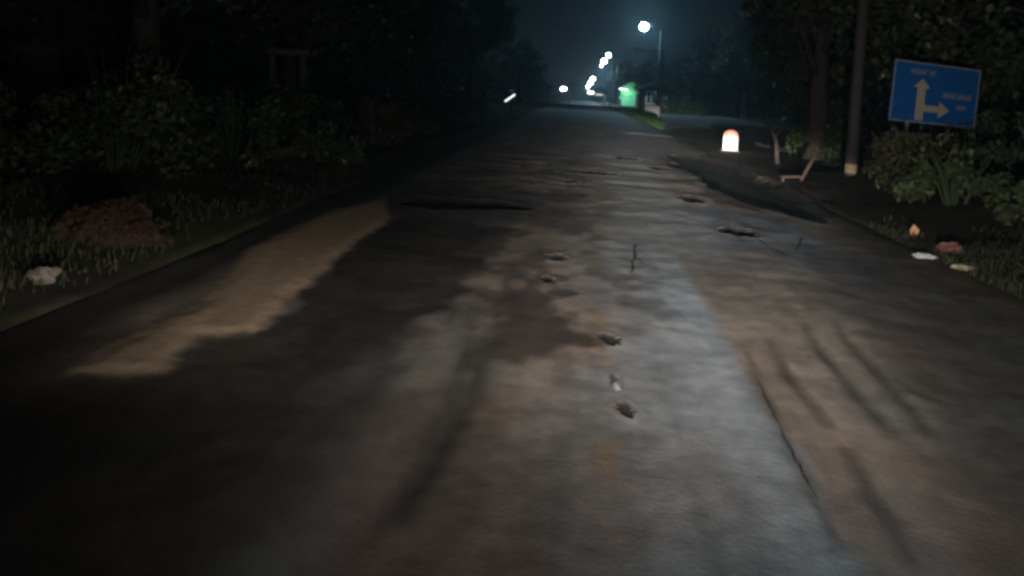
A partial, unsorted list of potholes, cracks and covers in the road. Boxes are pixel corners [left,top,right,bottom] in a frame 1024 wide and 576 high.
pothole [602,396,649,425]
pothole [530,273,567,285]
pothole [534,252,580,263]
pothole [658,154,837,227]
crack [758,381,819,500]
crack [623,244,644,274]
pothole [383,195,541,212]
pothole [587,329,632,350]
crack [756,237,803,257]
pothole [705,224,772,239]
